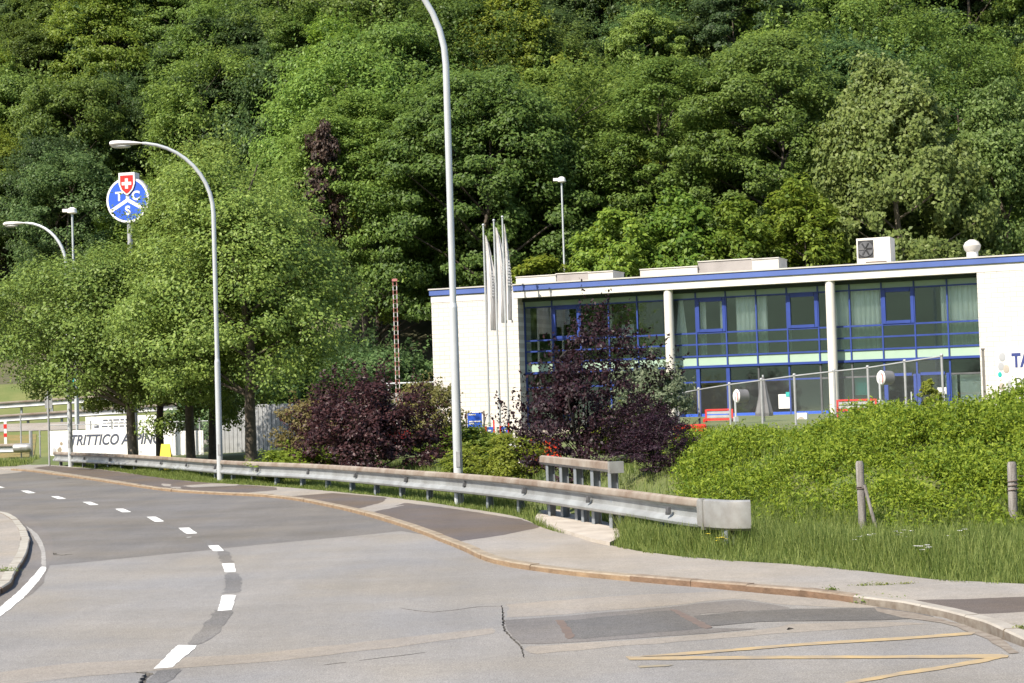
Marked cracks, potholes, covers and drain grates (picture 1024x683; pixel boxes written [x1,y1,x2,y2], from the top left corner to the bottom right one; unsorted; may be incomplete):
crack [403,605,525,658]
